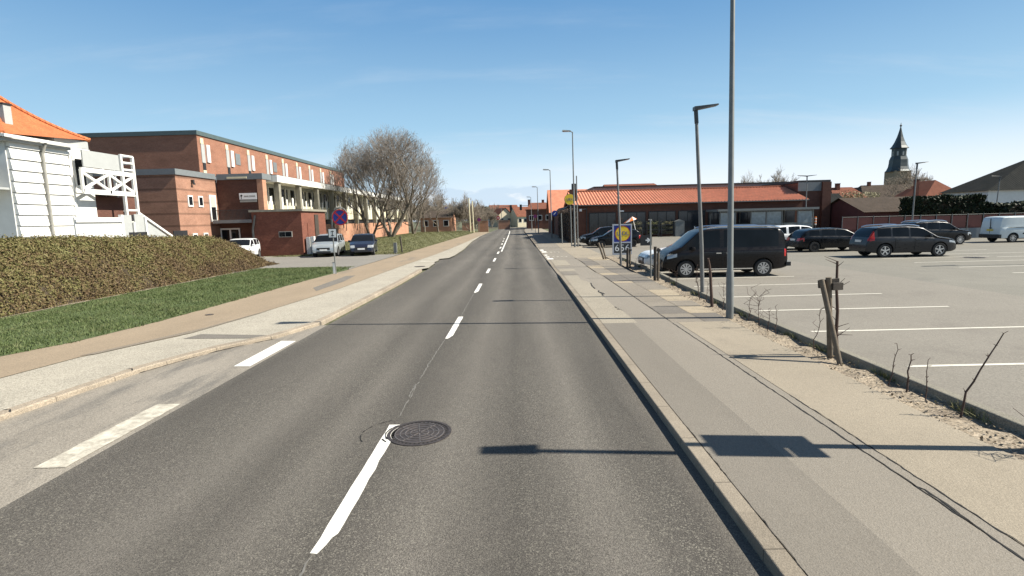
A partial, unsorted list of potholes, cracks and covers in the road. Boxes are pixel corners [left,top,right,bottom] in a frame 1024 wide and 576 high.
crack [360,381,420,442]
manhole cover [387,420,452,446]
